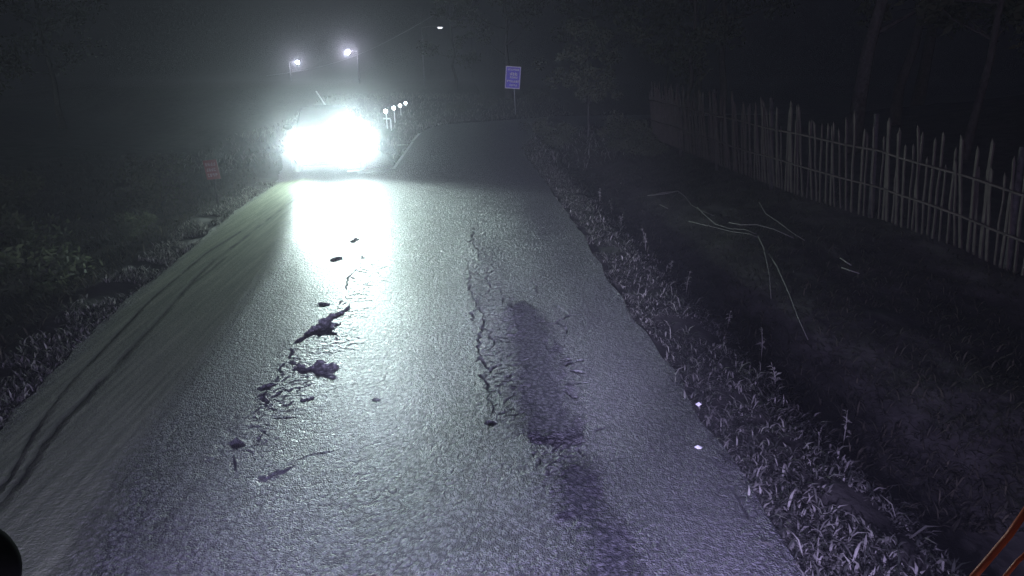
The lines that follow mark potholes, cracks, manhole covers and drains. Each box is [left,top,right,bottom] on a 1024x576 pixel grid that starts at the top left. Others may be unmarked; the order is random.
pothole [229,437,246,450]
crack [293,450,335,461]
crack [465,227,581,417]
crack [233,339,313,471]
pothole [294,305,351,343]
pothole [287,360,339,382]
